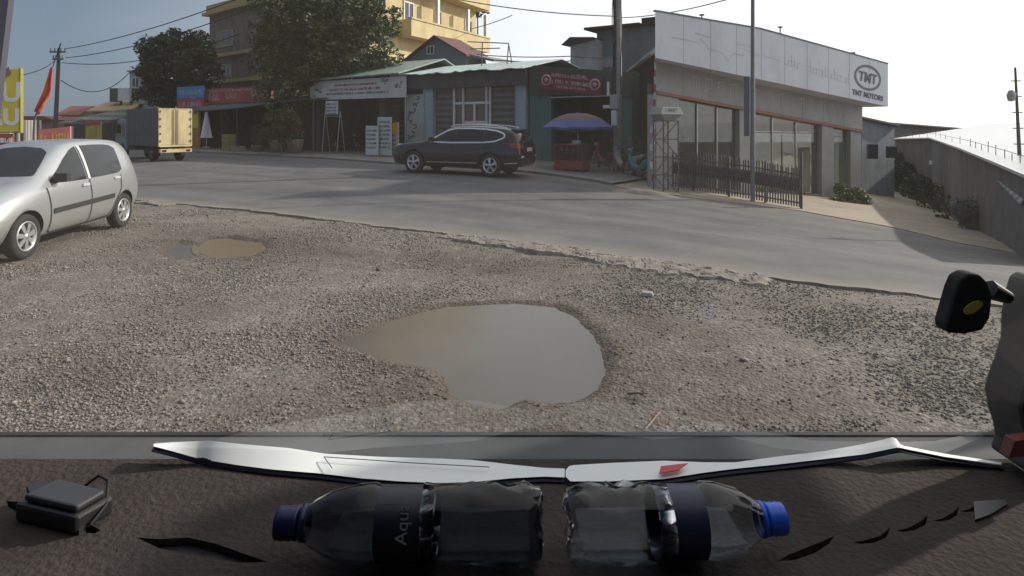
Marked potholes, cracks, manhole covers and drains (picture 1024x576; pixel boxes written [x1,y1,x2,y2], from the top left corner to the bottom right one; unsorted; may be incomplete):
pothole [325,299,621,413]
pothole [155,234,275,259]
